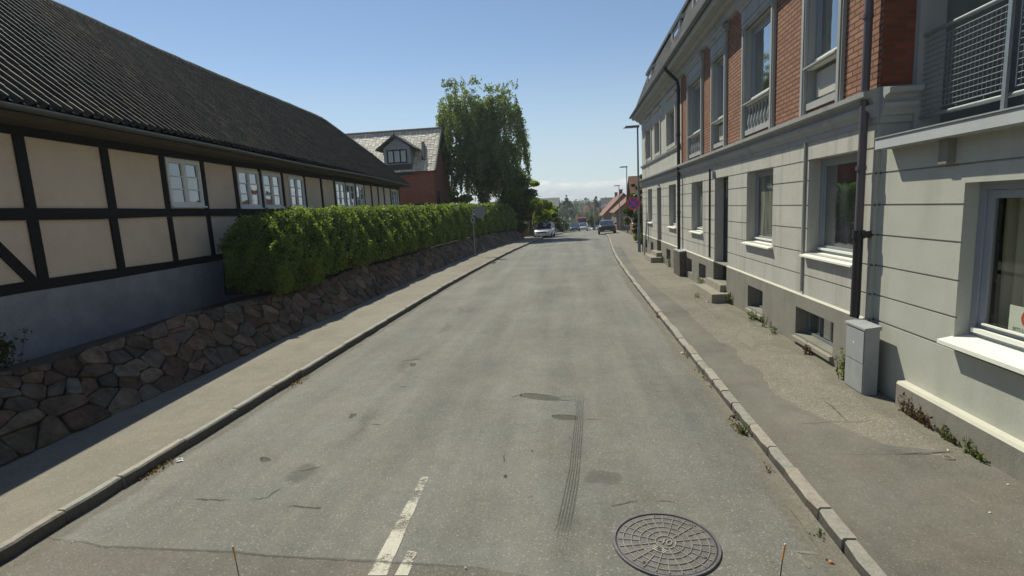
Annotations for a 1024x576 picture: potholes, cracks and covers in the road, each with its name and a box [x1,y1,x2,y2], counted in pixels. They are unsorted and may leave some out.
manhole cover [613,512,722,576]
